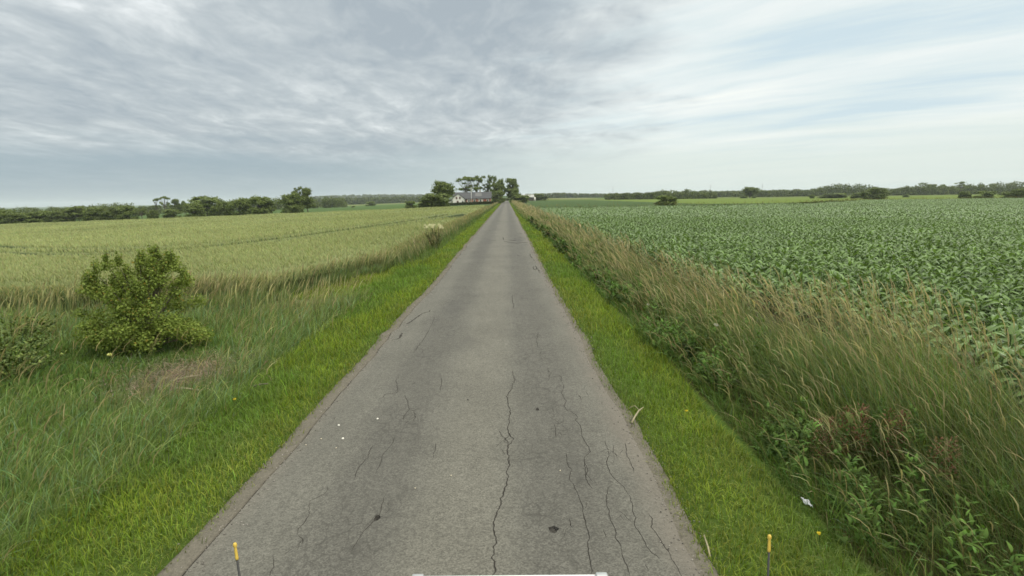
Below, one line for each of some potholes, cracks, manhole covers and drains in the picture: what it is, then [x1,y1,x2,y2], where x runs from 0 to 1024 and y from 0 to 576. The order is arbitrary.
crack [491,372,521,575]
crack [182,310,435,576]
